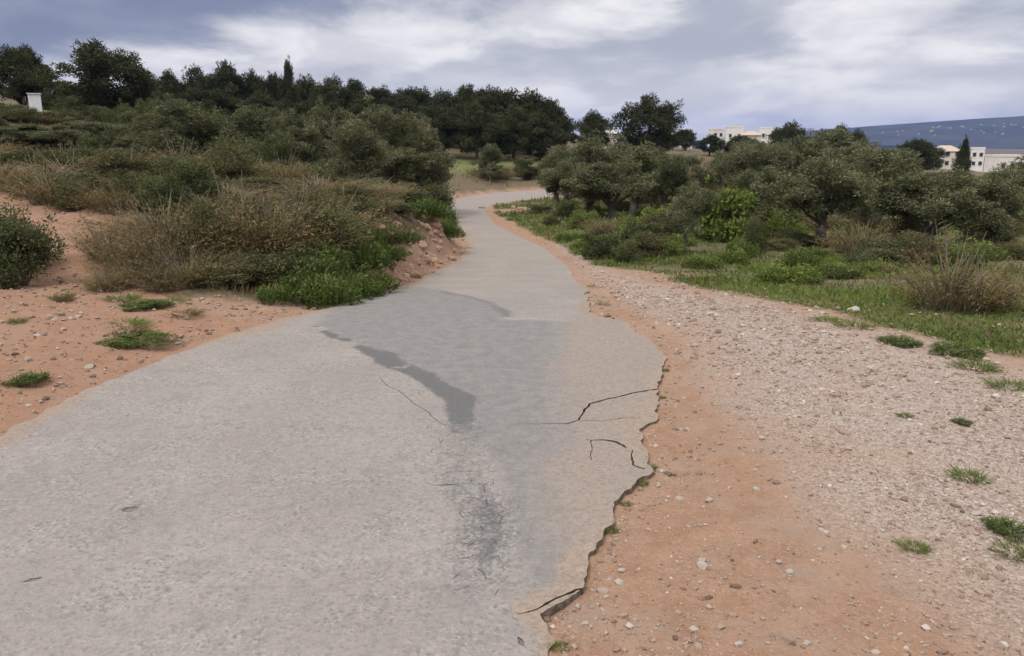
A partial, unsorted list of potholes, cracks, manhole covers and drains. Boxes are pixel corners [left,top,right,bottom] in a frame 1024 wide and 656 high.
crack [519,588,583,614]
crack [552,388,659,469]
